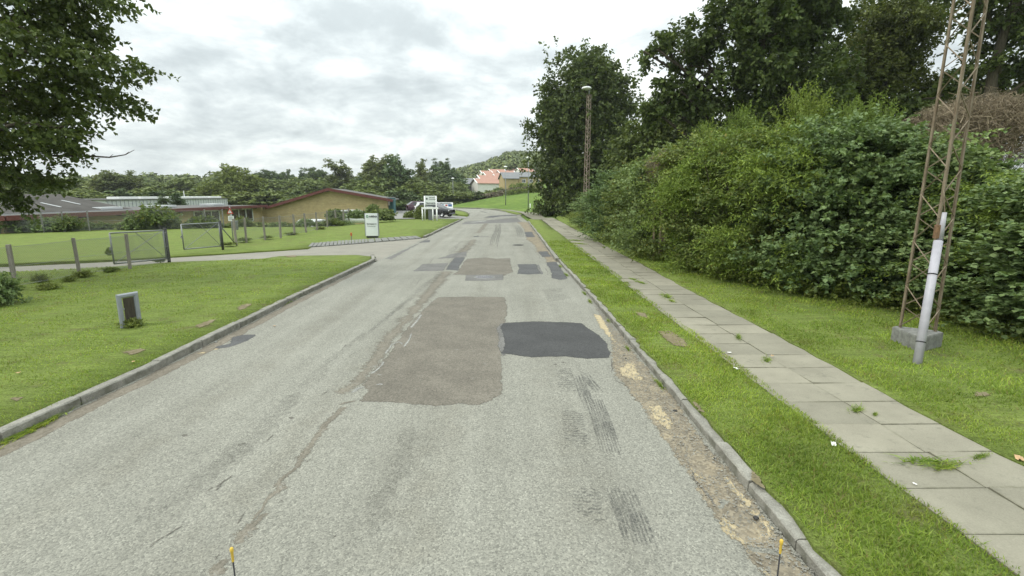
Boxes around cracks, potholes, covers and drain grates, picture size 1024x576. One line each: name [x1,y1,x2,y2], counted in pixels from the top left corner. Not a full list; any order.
crack [207,315,422,576]
